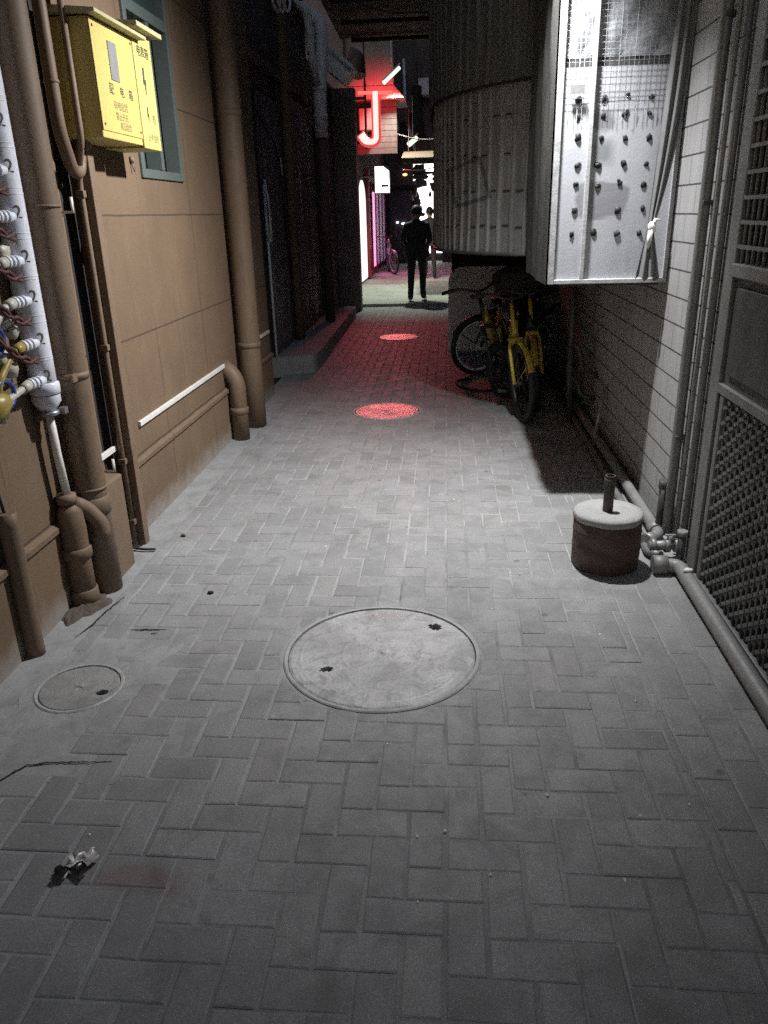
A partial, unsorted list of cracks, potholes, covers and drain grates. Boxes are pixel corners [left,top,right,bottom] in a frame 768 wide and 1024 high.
crack [77,597,167,636]
manhole cover [18,658,139,720]
crack [0,761,113,781]
manhole cover [271,602,494,723]
